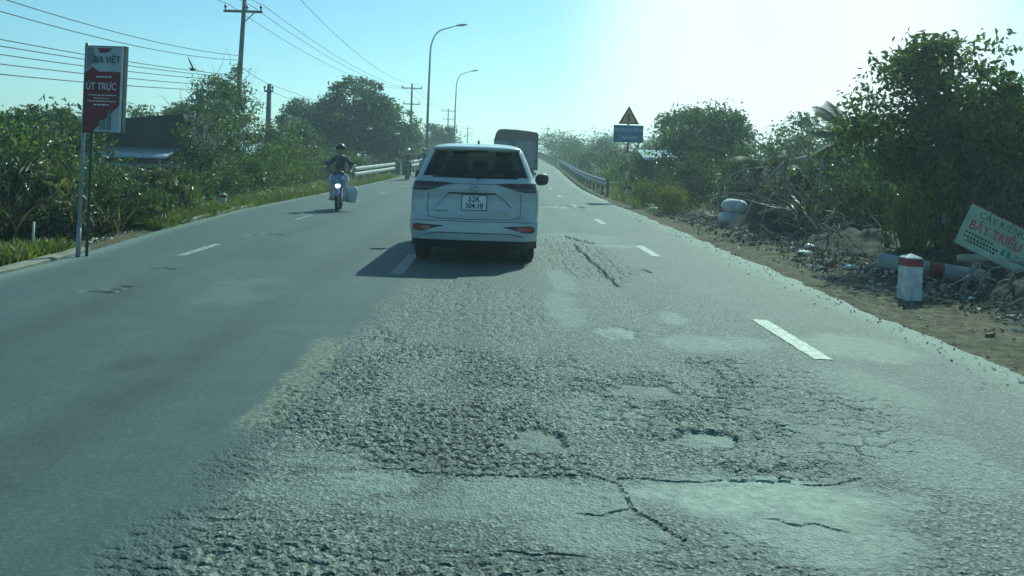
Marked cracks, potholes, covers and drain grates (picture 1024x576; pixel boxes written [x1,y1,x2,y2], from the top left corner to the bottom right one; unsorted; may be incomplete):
pothole [661,425,751,449]
pothole [502,423,577,457]
crack [71,235,947,576]
